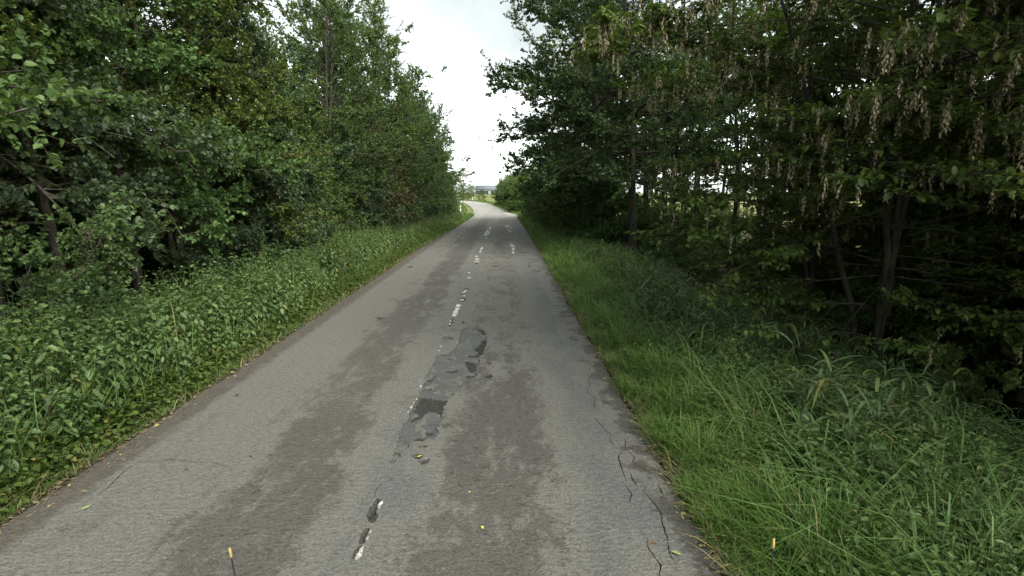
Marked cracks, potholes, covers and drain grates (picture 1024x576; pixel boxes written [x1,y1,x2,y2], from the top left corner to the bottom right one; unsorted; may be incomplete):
crack [89,459,229,498]
pothole [366,499,382,523]
pothole [390,328,487,463]
crack [582,361,713,576]
